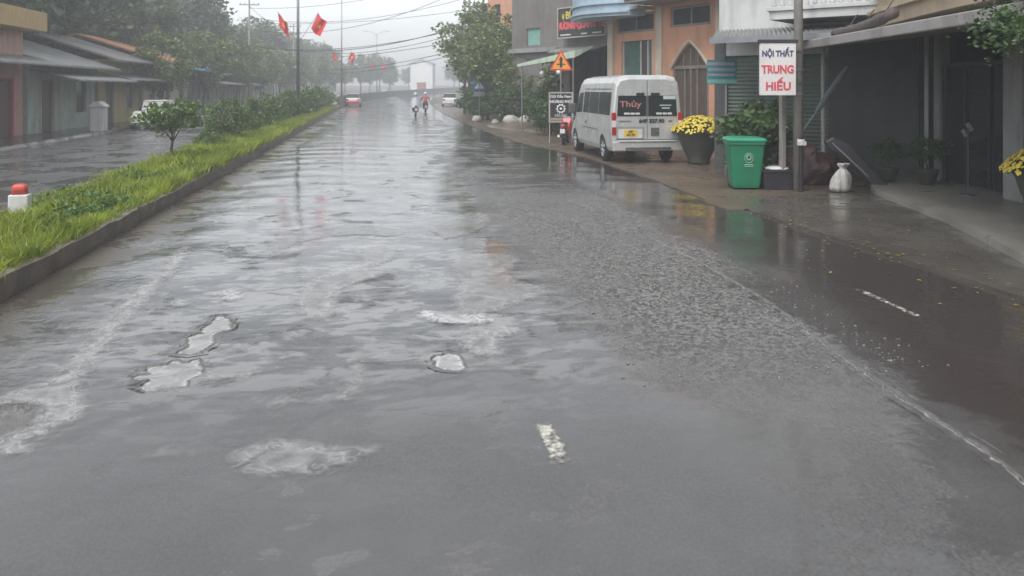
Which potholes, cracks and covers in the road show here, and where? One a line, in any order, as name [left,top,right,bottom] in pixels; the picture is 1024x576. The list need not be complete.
pothole [128,356,213,393]
pothole [169,315,237,357]
pothole [424,351,472,374]
